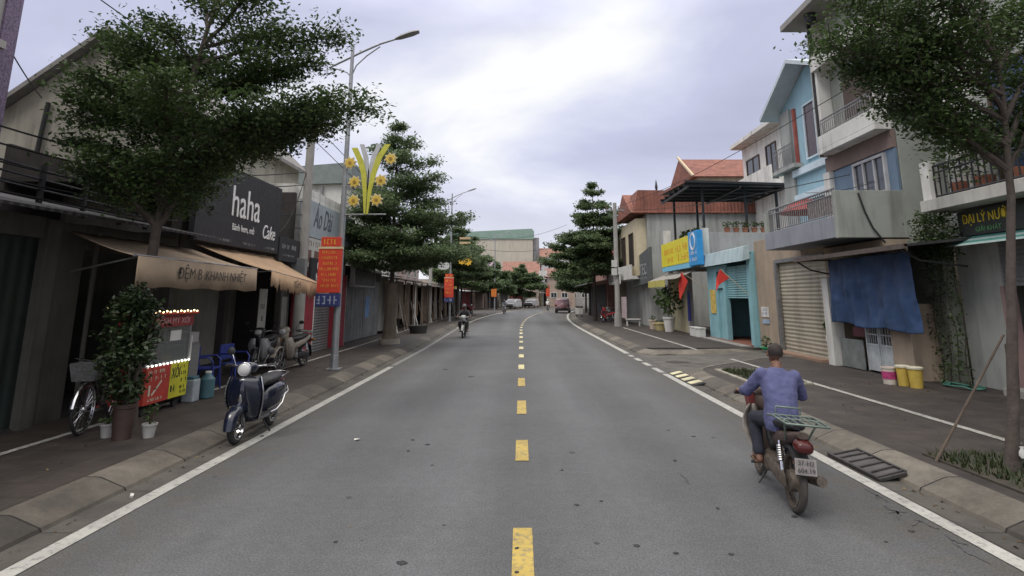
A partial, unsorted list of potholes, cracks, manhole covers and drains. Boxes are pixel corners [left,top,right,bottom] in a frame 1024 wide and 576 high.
crack [864,488,991,564]
drain grate [827,447,908,482]
